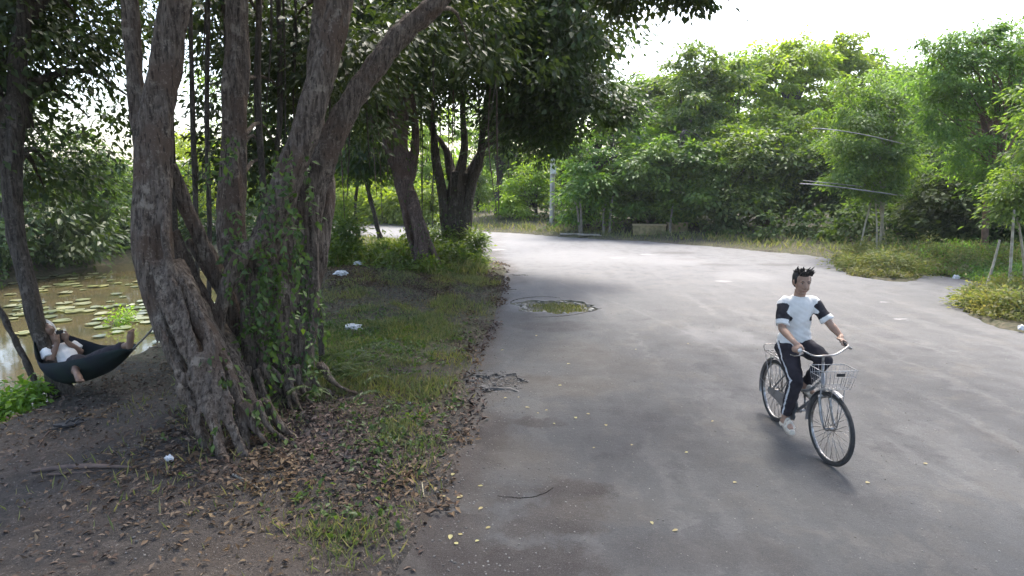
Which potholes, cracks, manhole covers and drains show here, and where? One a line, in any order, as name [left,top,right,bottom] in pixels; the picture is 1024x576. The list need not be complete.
pothole [464,370,528,394]
pothole [510,300,598,314]
